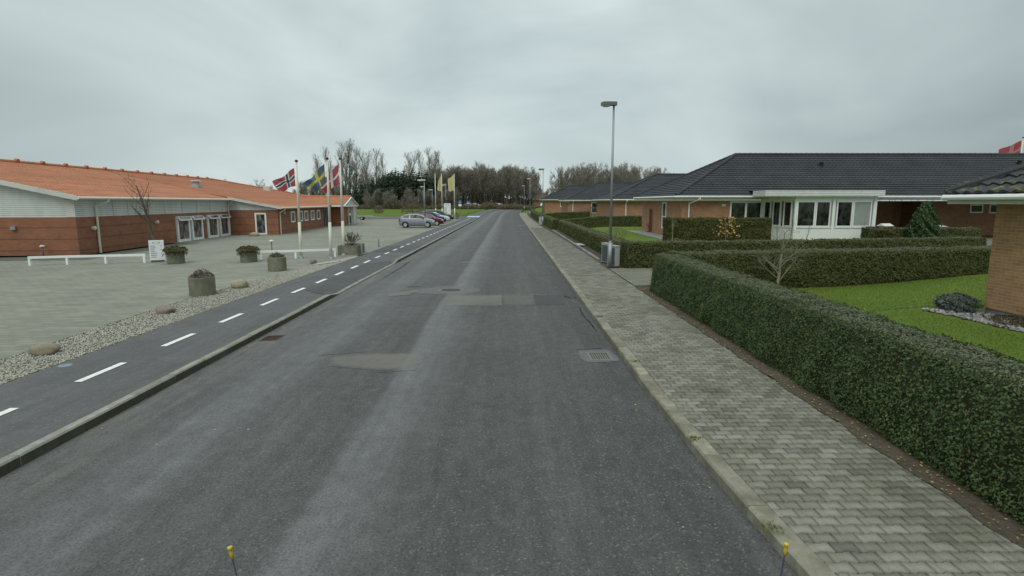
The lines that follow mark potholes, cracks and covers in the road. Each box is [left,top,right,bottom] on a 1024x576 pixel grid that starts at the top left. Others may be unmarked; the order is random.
drain grate [586,352,613,360]
